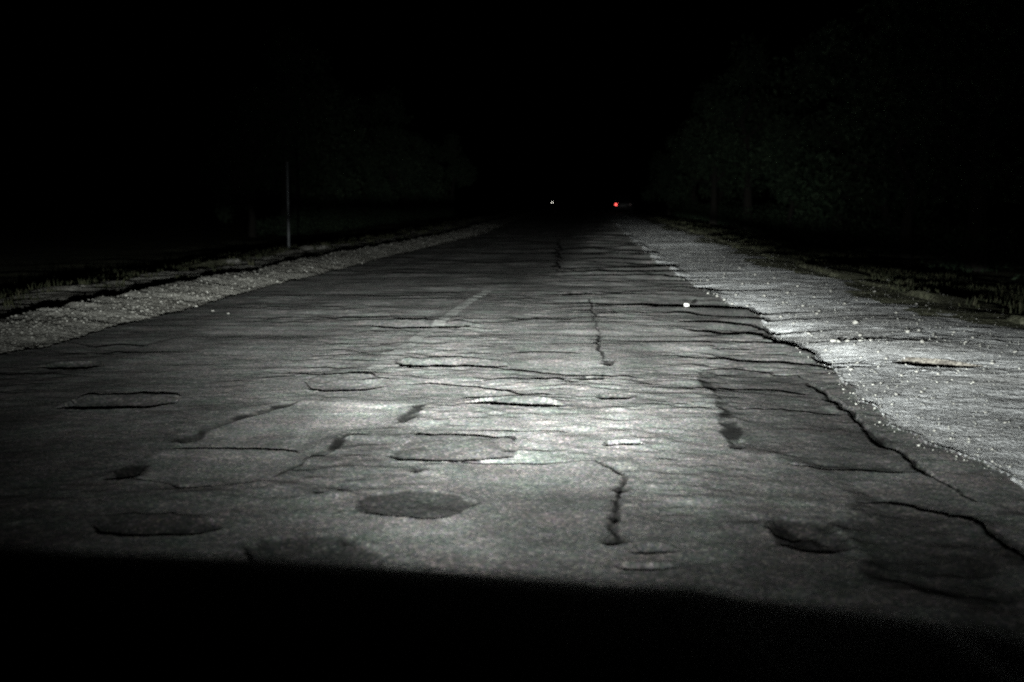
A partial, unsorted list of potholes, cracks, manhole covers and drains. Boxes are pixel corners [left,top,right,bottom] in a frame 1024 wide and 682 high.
pothole [618,562,680,570]
pothole [69,393,180,409]
crack [551,239,588,270]
pothole [306,373,390,392]
pothole [355,489,481,519]
crack [505,299,606,376]
pothole [389,435,519,462]
crack [465,459,630,545]
crack [173,401,370,476]
pothole [770,517,855,554]
crack [135,477,256,488]
